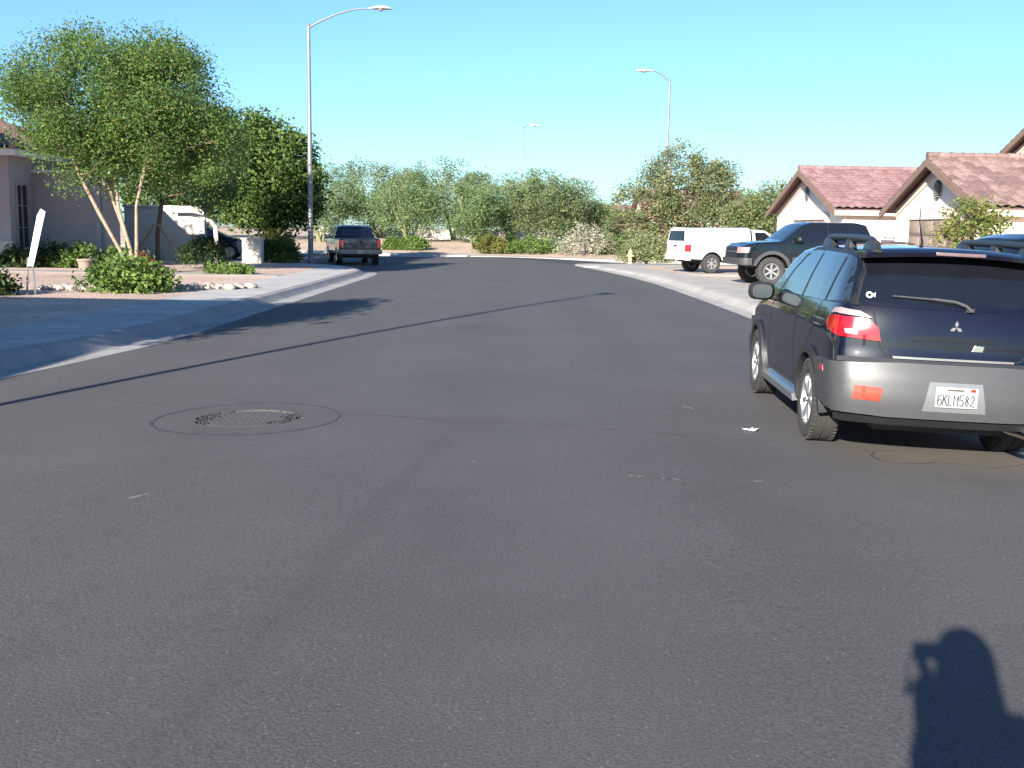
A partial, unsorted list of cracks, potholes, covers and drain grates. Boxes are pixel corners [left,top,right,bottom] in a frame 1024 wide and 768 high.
crack [865,450,1023,468]
manhole cover [192,410,303,427]
